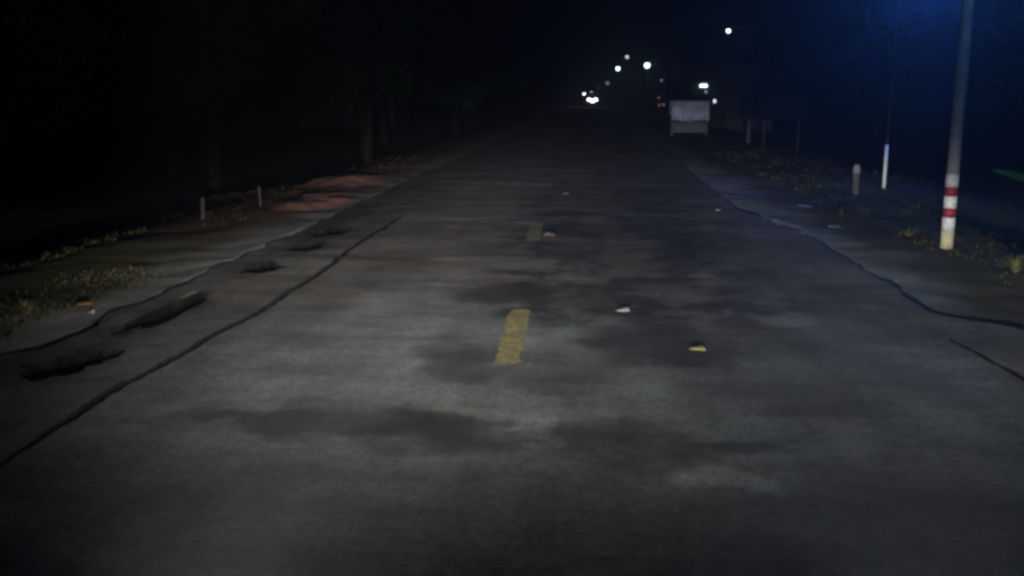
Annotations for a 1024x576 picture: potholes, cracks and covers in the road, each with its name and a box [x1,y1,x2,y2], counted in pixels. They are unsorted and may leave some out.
pothole [209,258,303,276]
crack [0,212,422,499]
pothole [0,344,150,390]
pothole [294,226,374,239]
crack [908,333,1024,400]
pothole [98,288,220,341]
pothole [270,239,355,255]
